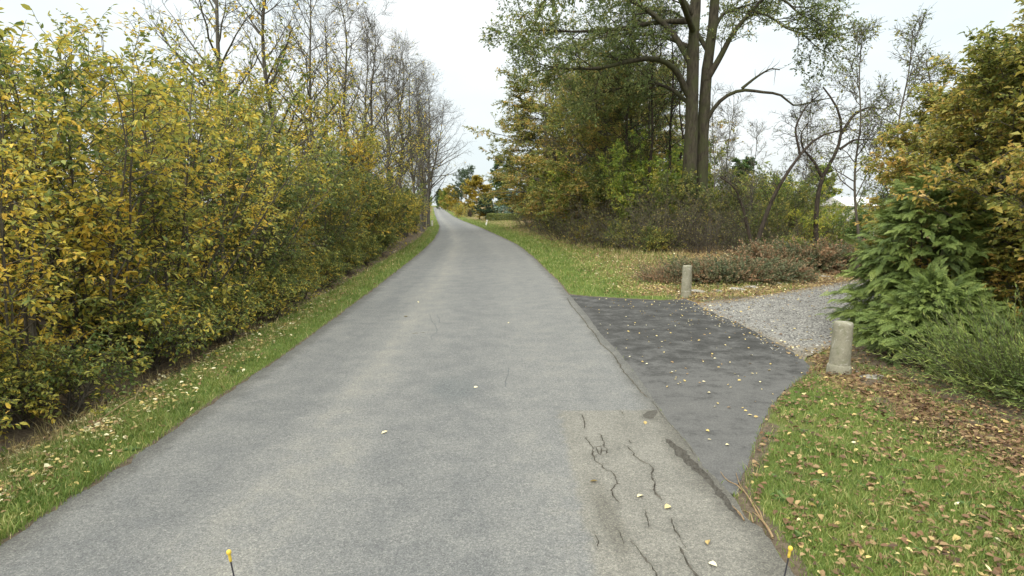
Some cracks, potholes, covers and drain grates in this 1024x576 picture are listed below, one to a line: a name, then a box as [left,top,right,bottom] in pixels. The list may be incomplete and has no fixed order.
crack [582,415,662,576]
crack [671,519,698,576]
